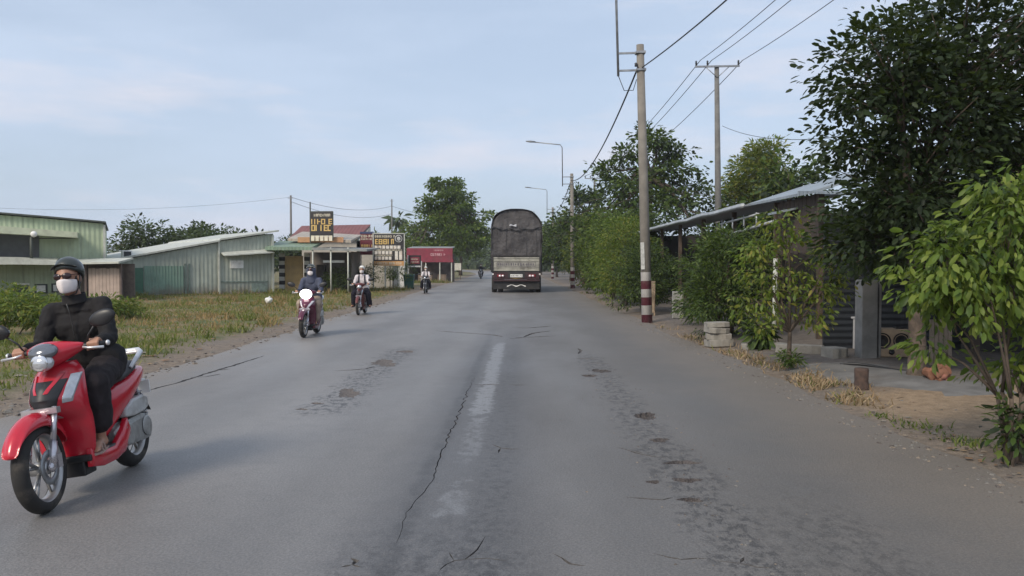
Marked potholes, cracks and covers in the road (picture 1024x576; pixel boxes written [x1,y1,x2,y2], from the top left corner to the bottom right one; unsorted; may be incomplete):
pothole [634,412,656,421]
pothole [371,359,396,367]
crack [396,378,494,543]
crack [150,356,262,390]
pothole [339,388,360,398]
crack [440,537,506,570]
crack [444,326,548,339]
